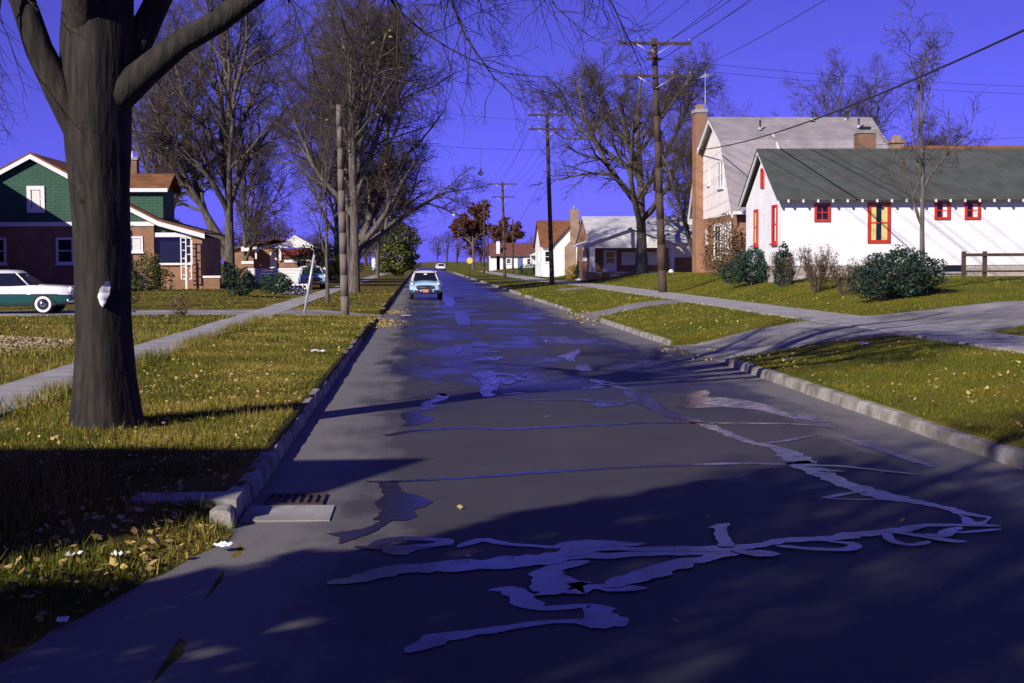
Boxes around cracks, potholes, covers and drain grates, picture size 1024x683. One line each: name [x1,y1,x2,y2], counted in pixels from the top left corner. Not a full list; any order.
drain grate [128,491,335,523]
